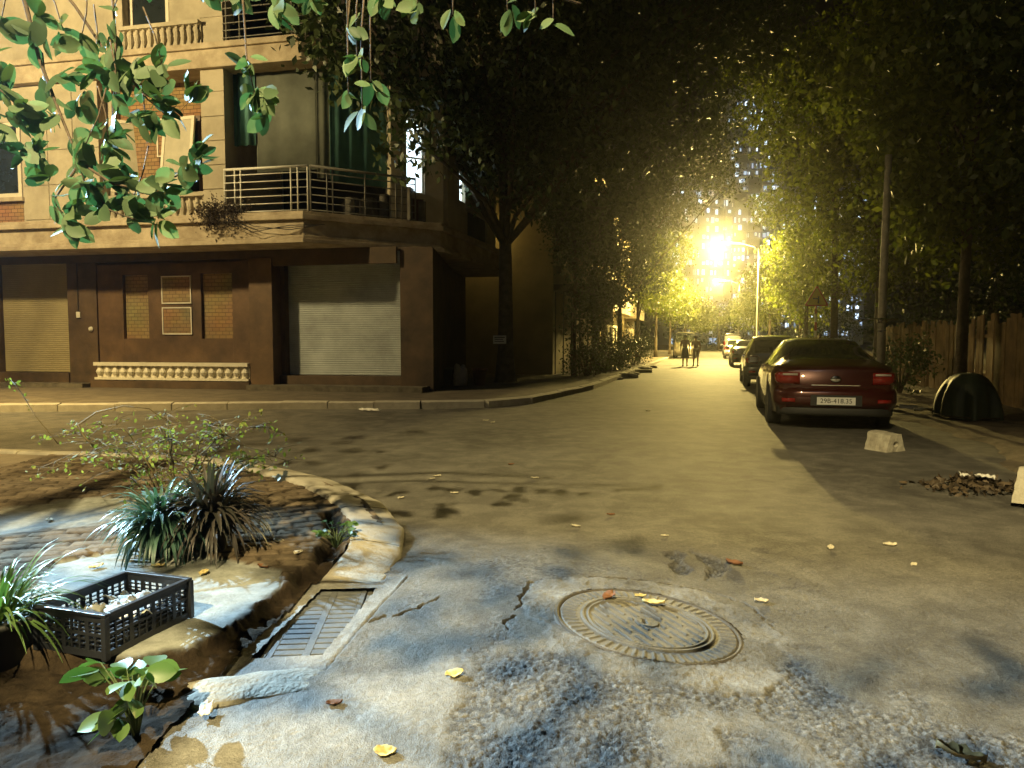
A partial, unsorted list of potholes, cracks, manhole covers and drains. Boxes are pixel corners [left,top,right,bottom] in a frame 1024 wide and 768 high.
manhole cover [554,588,744,666]
drain grate [261,590,374,658]
pothole [656,549,696,576]
crack [502,581,538,631]
crack [368,595,442,623]
